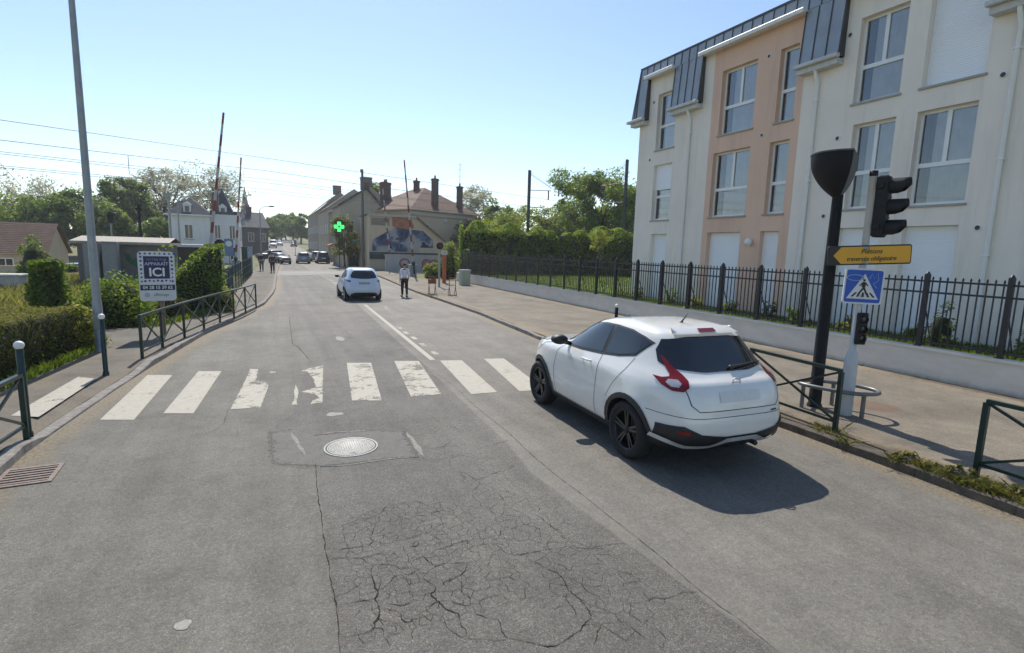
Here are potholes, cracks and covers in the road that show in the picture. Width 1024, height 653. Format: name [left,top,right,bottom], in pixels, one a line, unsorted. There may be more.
manhole cover [323,437,378,457]
drain grate [0,462,65,489]
crack [329,501,536,643]
crack [429,415,697,648]
